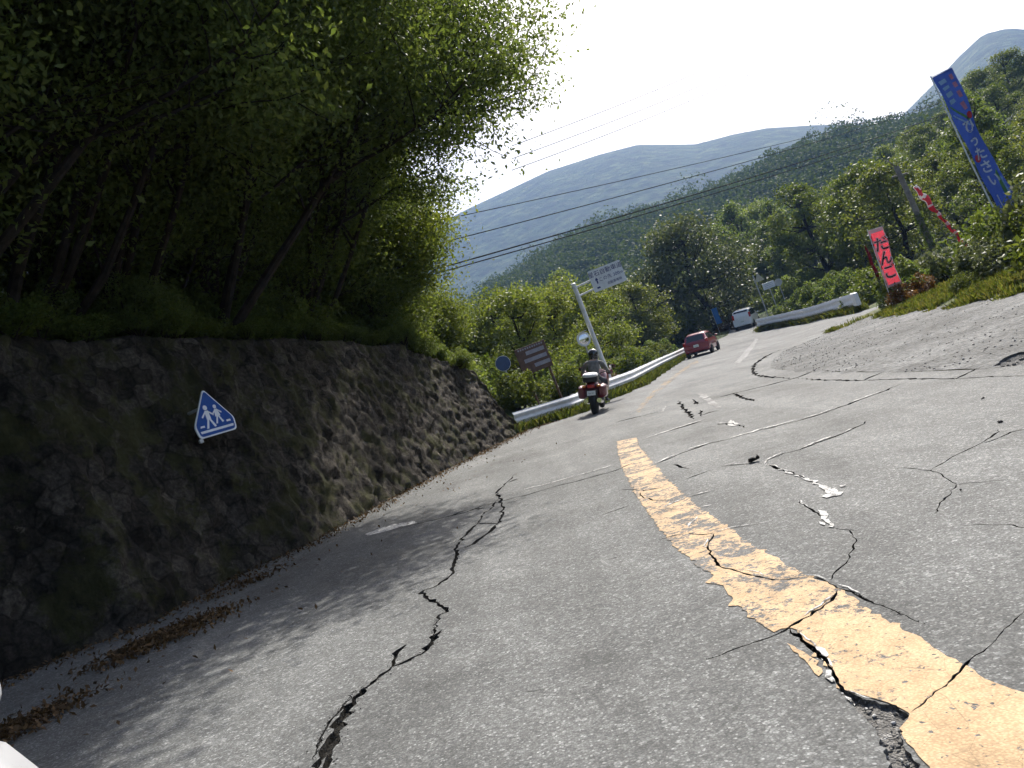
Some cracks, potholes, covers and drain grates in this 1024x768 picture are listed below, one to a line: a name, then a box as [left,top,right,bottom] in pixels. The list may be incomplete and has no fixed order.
crack [920,612,1024,707]
crack [897,429,1024,514]
pothole [994,352,1024,367]
crack [298,464,630,768]
crack [608,385,927,702]
